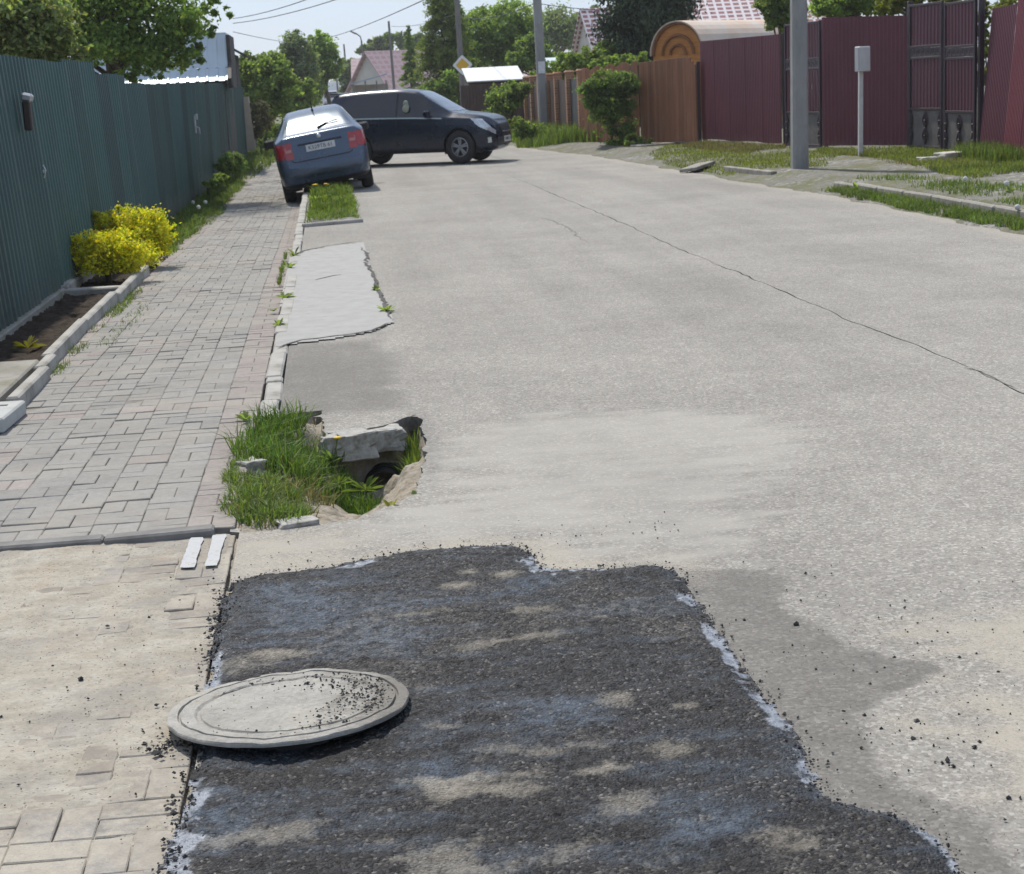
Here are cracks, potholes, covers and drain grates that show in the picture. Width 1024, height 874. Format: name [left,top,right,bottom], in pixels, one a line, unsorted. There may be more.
manhole cover [167,668,409,756]
crack [523,181,1024,394]
pothole [230,410,428,539]
